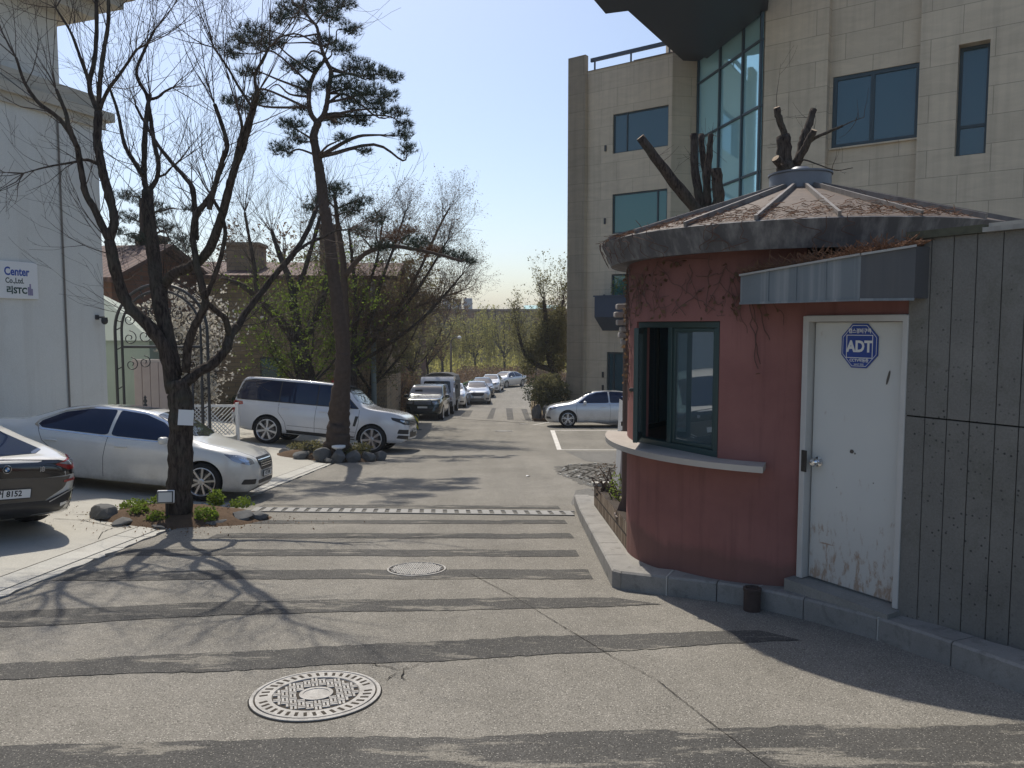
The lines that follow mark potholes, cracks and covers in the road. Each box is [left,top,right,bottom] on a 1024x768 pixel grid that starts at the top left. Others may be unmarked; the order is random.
manhole cover [247,670,382,723]
manhole cover [387,562,447,576]
